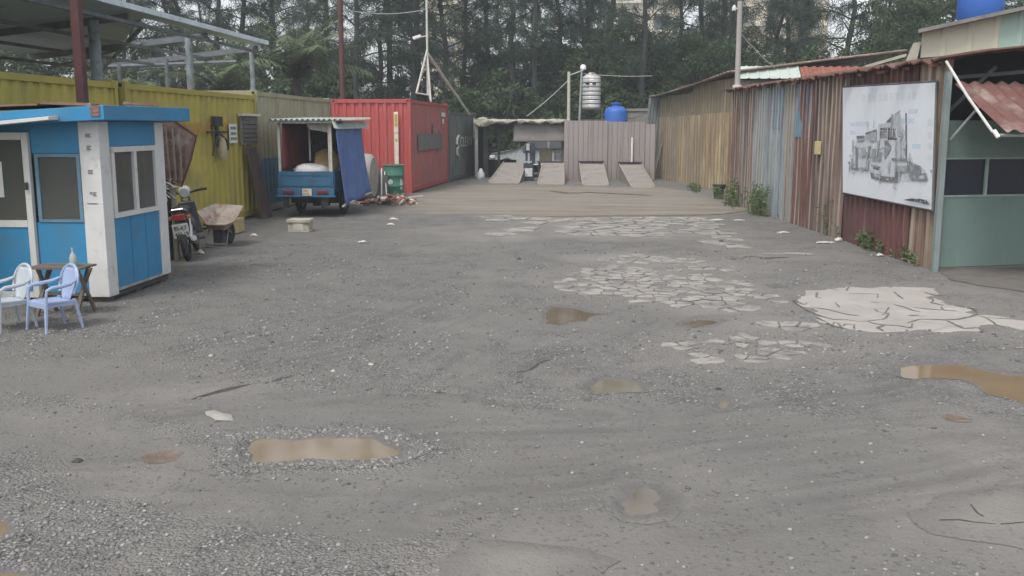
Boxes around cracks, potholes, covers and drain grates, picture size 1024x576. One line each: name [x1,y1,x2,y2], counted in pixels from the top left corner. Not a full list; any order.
crack [191,374,298,400]
pothole [538,304,614,326]
pothole [140,450,183,463]
pothole [673,316,730,328]
crack [515,360,550,374]
pothole [943,414,972,423]
pothole [885,358,1024,404]
pothole [208,426,435,469]
crack [567,210,786,258]
crack [566,255,763,311]
crack [740,287,1021,359]
pothole [603,479,685,524]
